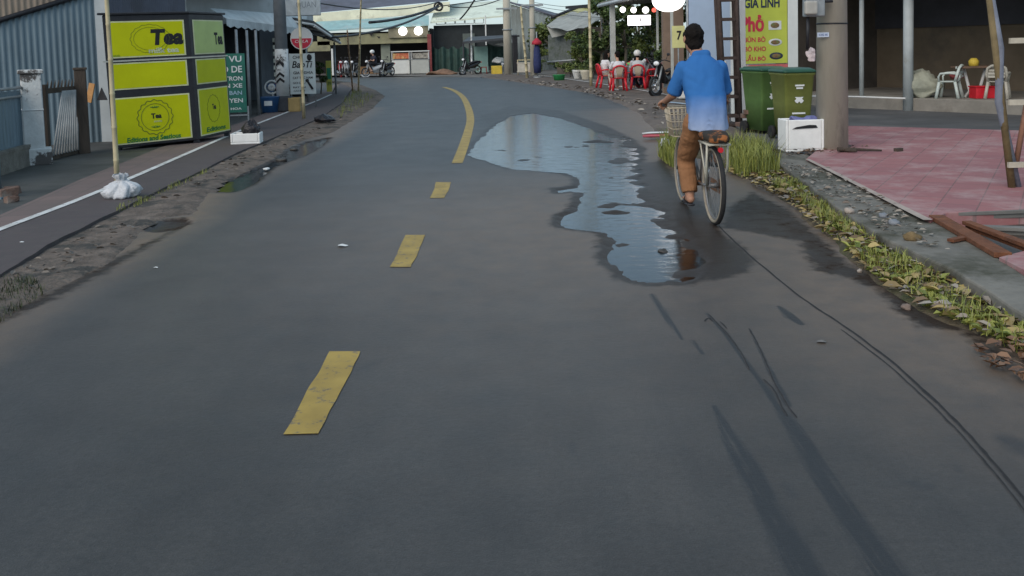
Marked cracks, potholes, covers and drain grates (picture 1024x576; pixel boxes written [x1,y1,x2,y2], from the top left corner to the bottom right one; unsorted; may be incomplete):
pothole [139,216,200,234]
